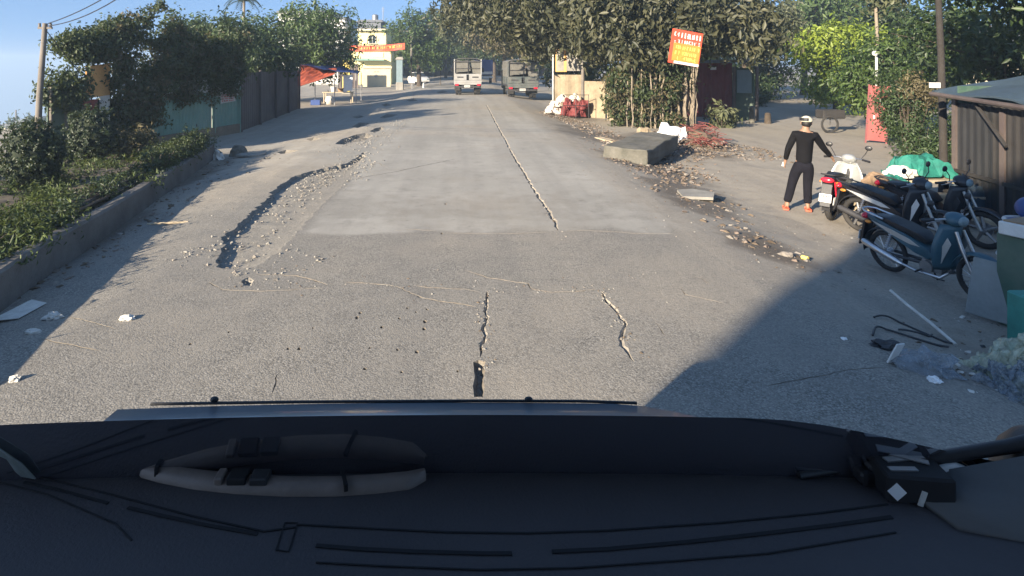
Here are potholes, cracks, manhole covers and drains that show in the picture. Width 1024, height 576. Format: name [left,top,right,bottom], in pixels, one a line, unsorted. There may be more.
crack [771,367,887,385]
pothole [215,152,367,270]
crack [348,270,635,362]
pothole [336,133,372,145]
